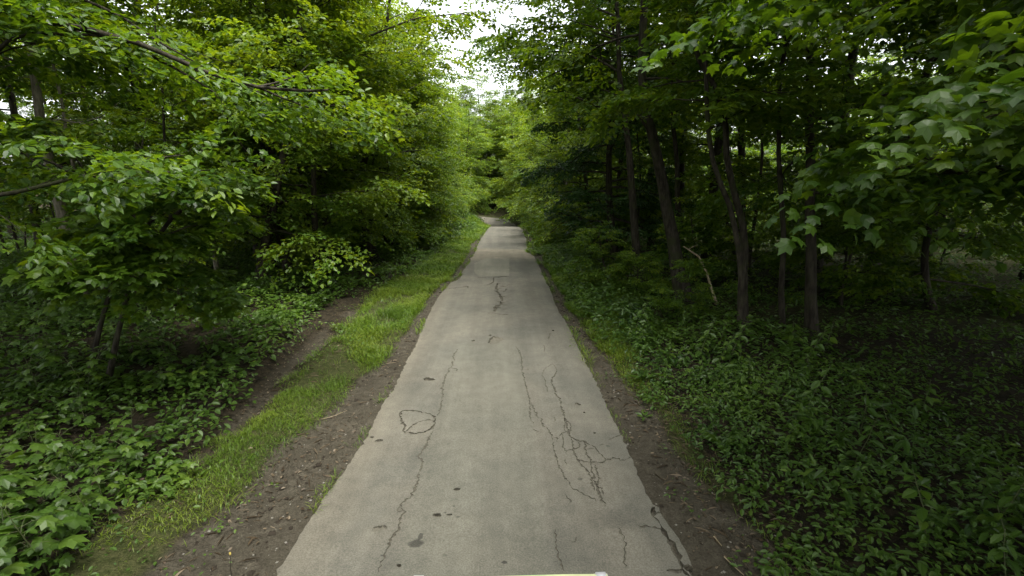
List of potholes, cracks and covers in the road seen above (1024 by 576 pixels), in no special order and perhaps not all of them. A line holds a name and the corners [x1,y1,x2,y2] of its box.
crack [554,529,577,571]
crack [449,277,507,315]
crack [378,349,458,572]
crack [619,507,692,576]
crack [516,347,630,505]
